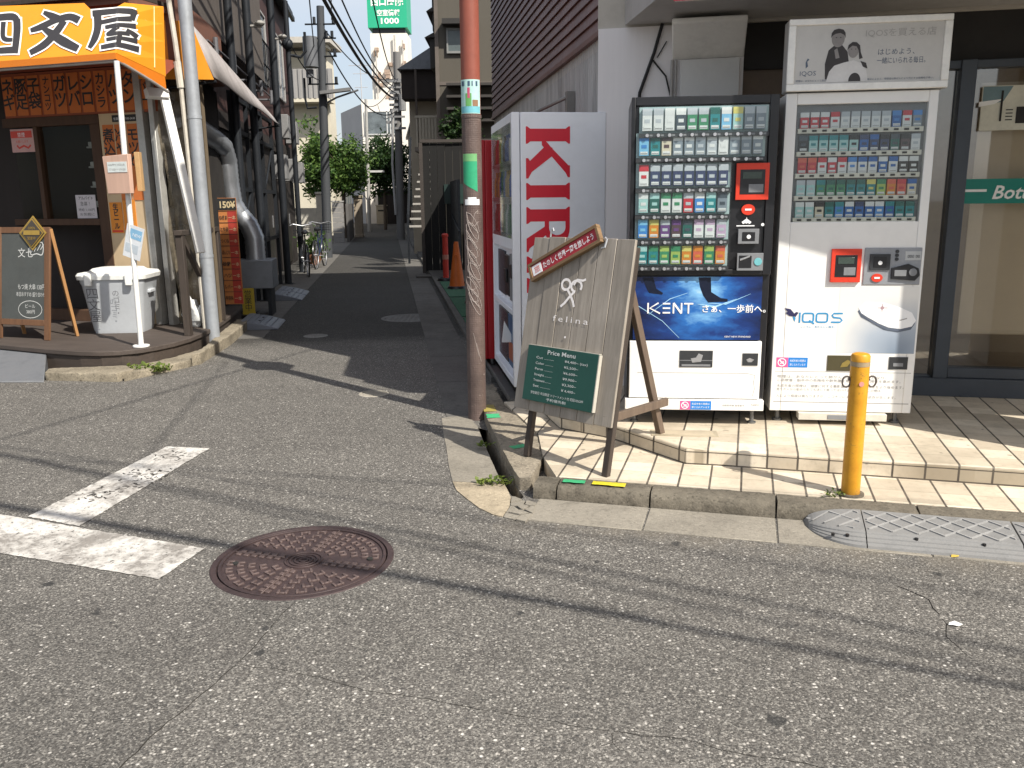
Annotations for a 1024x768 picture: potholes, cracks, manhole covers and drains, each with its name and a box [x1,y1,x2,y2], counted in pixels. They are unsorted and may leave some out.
crack [503,496,536,523]
crack [895,585,972,659]
manhole cover [209,526,394,601]
manhole cover [381,314,421,322]
